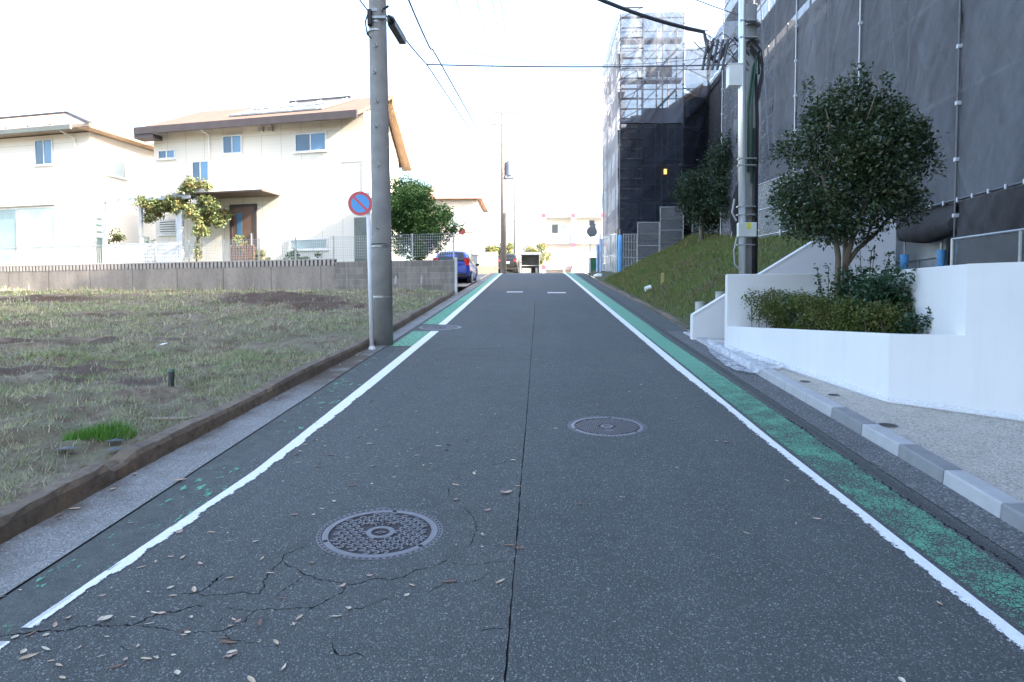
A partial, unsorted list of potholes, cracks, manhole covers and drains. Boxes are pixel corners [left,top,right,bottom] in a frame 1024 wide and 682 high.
crack [0,487,504,650]
manhole cover [568,416,647,437]
manhole cover [316,508,443,560]
